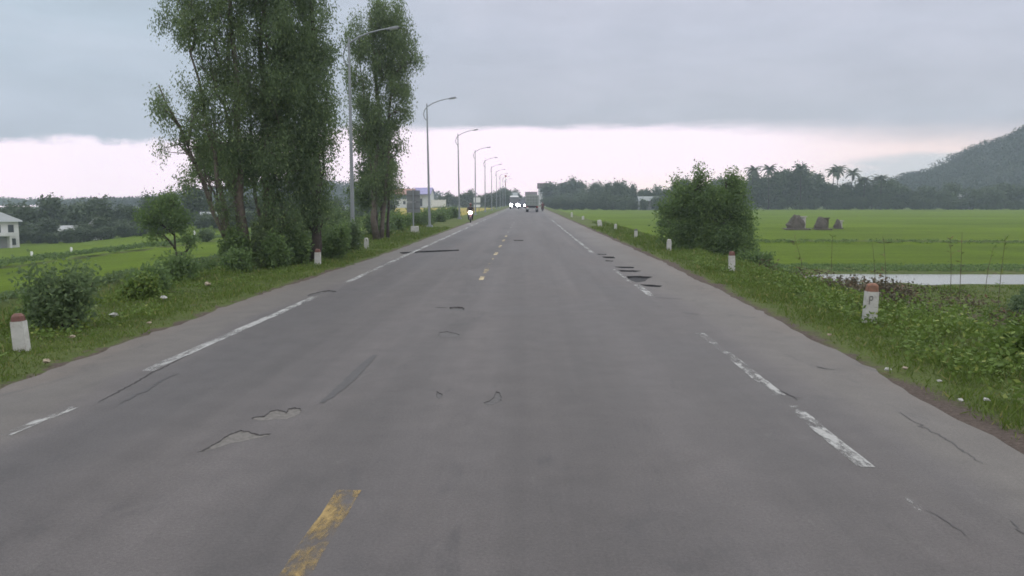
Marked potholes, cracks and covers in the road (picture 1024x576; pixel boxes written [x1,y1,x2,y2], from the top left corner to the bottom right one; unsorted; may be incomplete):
pothole [251,407,302,421]
crack [100,356,185,404]
crack [900,412,983,463]
pothole [197,430,270,453]
